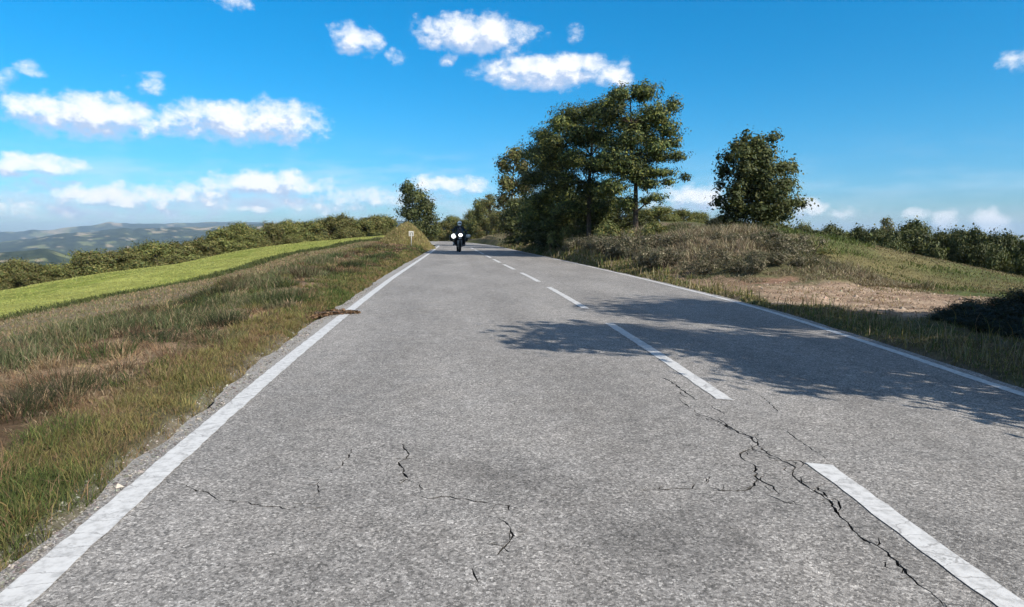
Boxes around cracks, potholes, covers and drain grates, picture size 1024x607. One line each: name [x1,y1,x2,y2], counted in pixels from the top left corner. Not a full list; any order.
crack [186,450,352,510]
crack [396,444,515,555]
crack [643,378,947,607]
